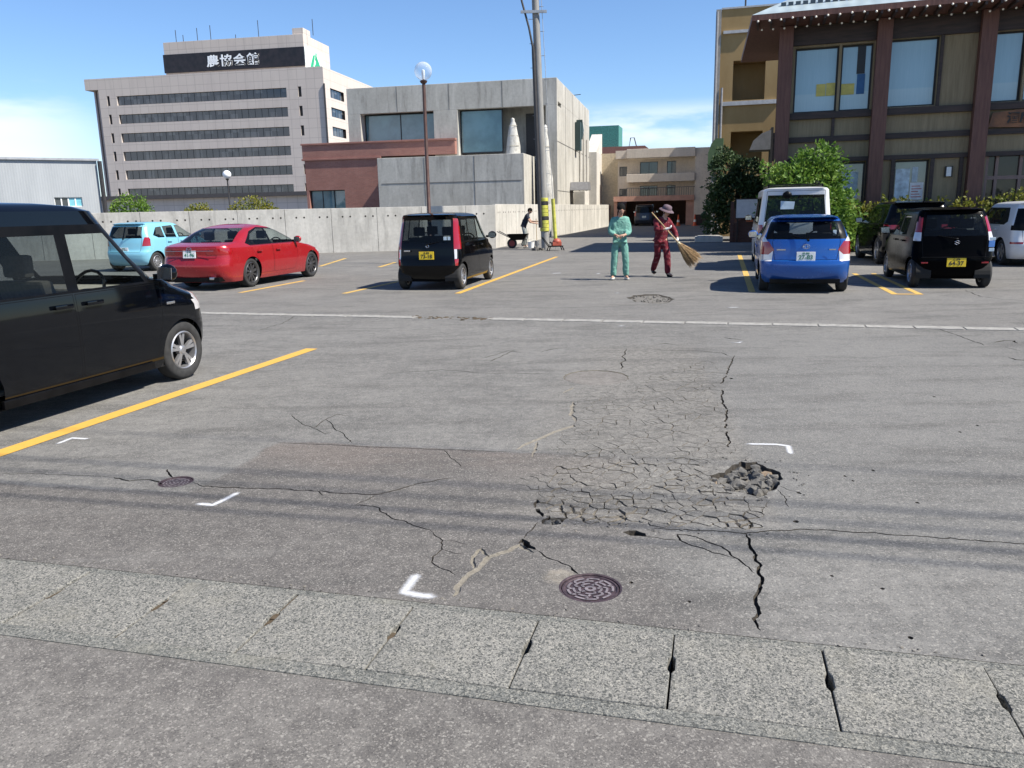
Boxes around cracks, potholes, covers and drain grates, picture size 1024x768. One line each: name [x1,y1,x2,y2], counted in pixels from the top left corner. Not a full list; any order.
pothole [709,461,783,497]
manhole cover [158,476,194,487]
crack [192,337,1024,630]
manhole cover [559,573,622,603]
pothole [626,294,673,304]
